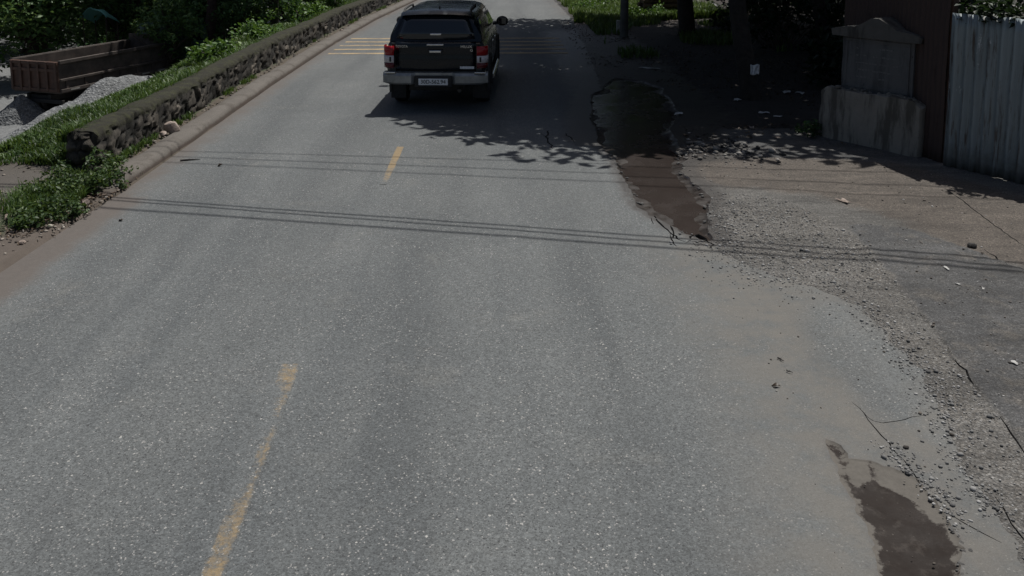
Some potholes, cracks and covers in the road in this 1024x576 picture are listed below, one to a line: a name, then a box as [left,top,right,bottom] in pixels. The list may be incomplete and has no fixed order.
crack [853,403,930,482]
pothole [588,78,715,241]
crack [651,216,714,250]
pothole [825,439,973,576]
crack [954,359,1024,453]
crack [946,189,1021,264]
